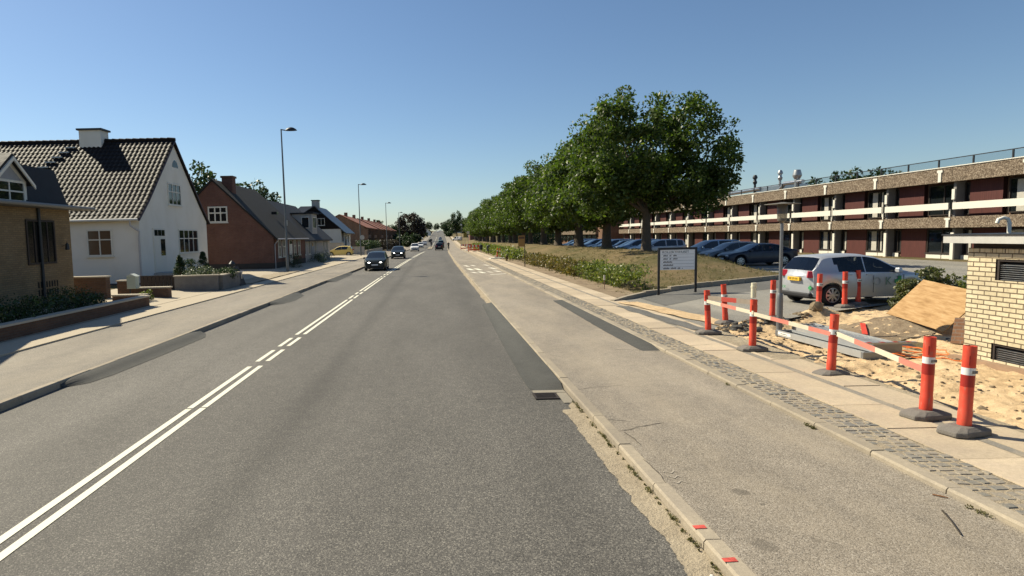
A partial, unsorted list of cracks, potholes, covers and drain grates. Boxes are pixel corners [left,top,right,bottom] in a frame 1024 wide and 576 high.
drain grate [532,392,560,400]
crack [607,419,665,482]
